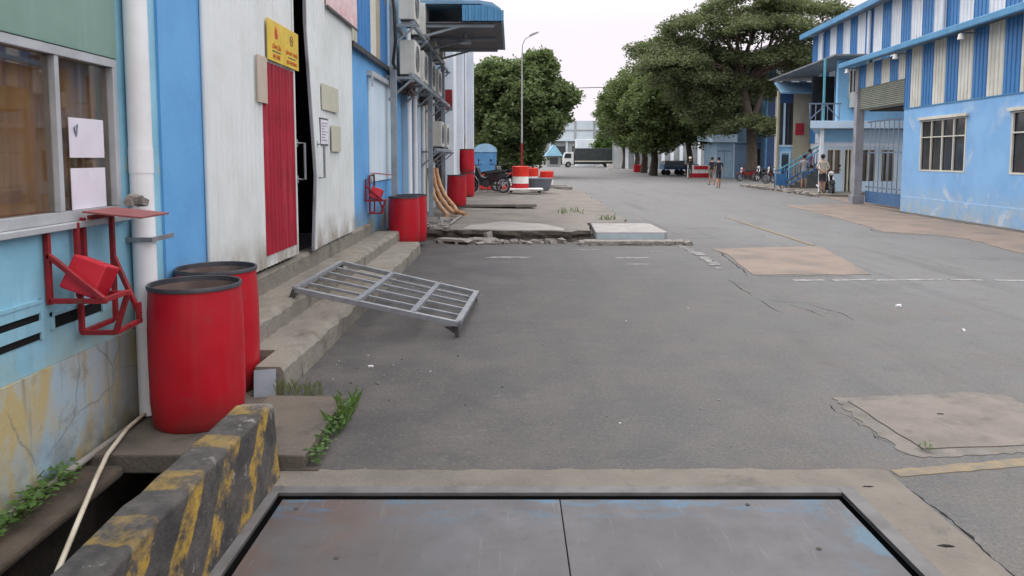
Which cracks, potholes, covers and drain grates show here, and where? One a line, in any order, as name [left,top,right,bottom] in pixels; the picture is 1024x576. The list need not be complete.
crack [720,252,854,320]
